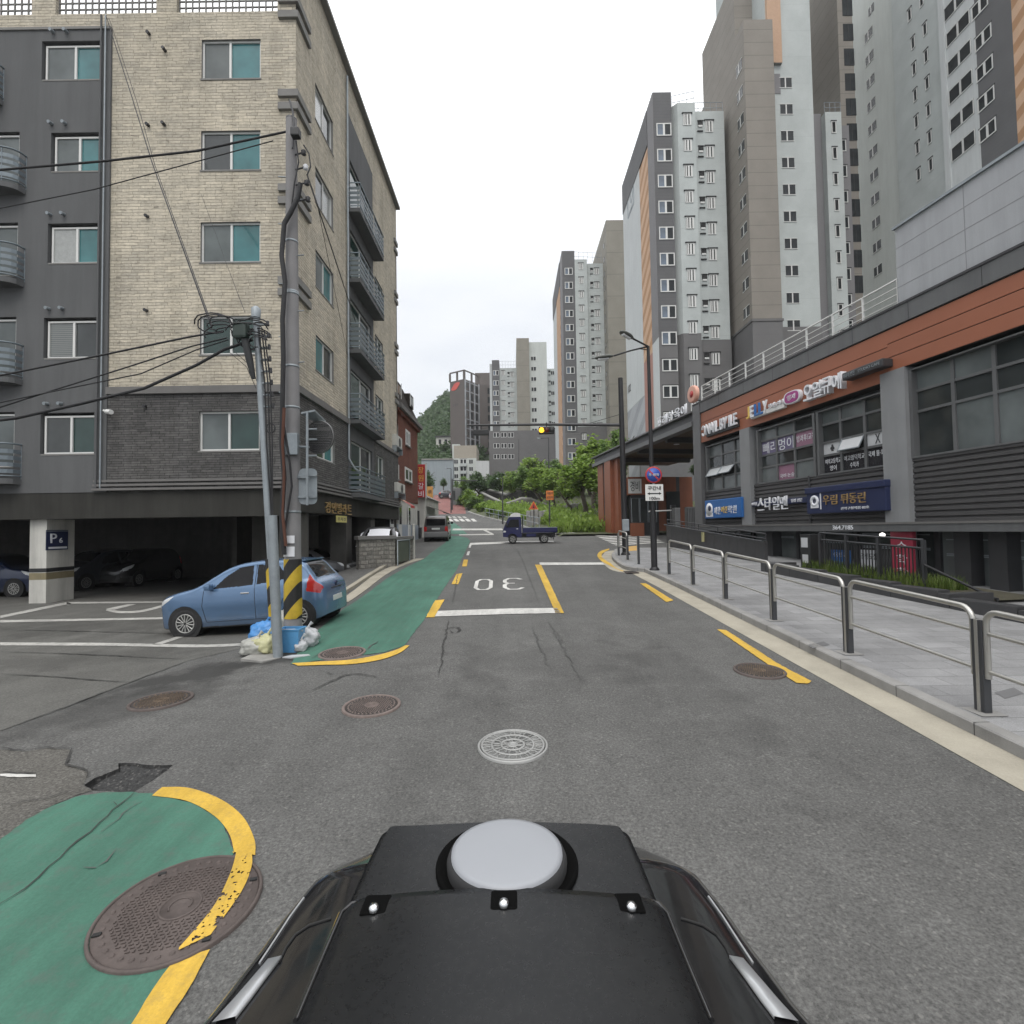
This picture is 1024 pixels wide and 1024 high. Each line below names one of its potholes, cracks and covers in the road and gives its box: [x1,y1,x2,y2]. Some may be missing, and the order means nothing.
crack [439,620,461,671]
manhole cover [84,852,263,976]
manhole cover [318,646,366,661]
manhole cover [478,729,548,764]
crack [1,746,142,903]
crack [517,550,583,679]
crack [312,641,378,690]
manhole cover [126,690,194,712]
manhole cover [733,662,787,680]
manhole cover [341,694,401,718]
pothole [85,763,174,792]
